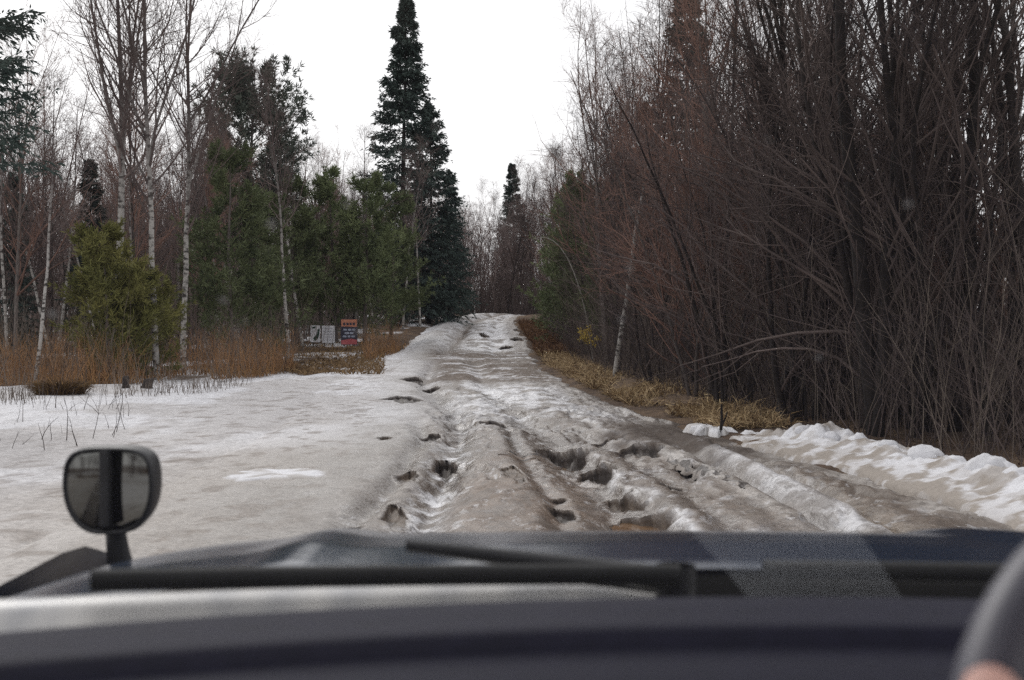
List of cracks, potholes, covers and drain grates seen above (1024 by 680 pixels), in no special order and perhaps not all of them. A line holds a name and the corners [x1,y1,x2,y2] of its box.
pothole [417,432,446,444]
pothole [391,469,427,486]
pothole [529,446,604,472]
pothole [572,460,621,488]
pothole [398,377,428,387]
pothole [377,396,427,404]
pothole [538,499,584,526]
pothole [374,502,417,533]
pothole [597,488,655,515]
pothole [428,458,465,483]
pothole [612,441,671,461]
pothole [662,458,719,482]
